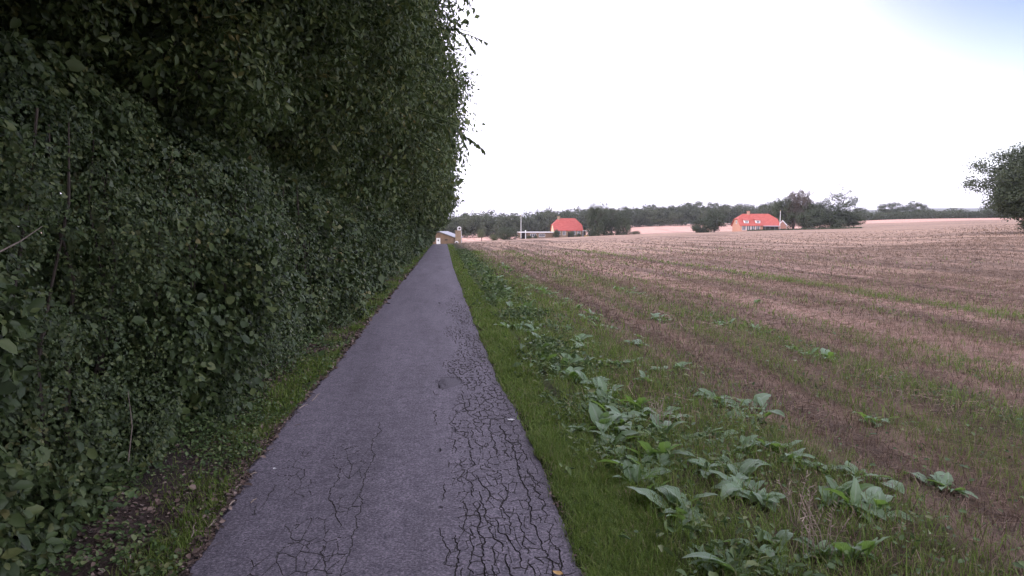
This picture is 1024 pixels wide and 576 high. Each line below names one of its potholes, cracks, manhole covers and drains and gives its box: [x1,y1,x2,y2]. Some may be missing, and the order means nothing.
crack [433,292,576,576]
crack [242,422,382,576]
pothole [435,376,462,390]
